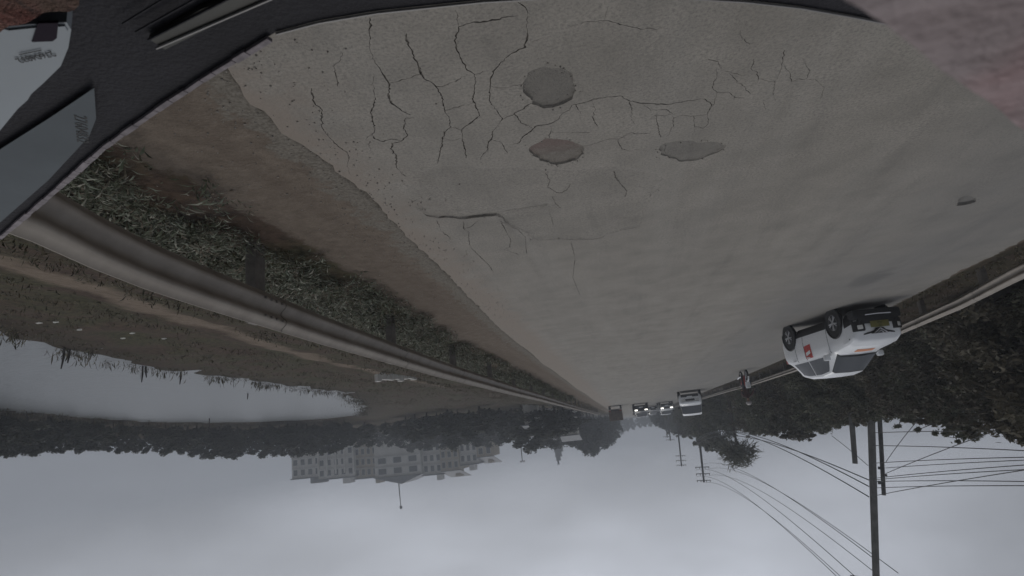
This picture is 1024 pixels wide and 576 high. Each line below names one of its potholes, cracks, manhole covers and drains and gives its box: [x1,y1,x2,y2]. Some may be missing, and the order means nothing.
pothole [520,63,581,111]
crack [709,36,823,110]
crack [368,3,712,175]
pothole [655,140,729,162]
pothole [955,196,979,206]
pothole [525,138,584,167]
